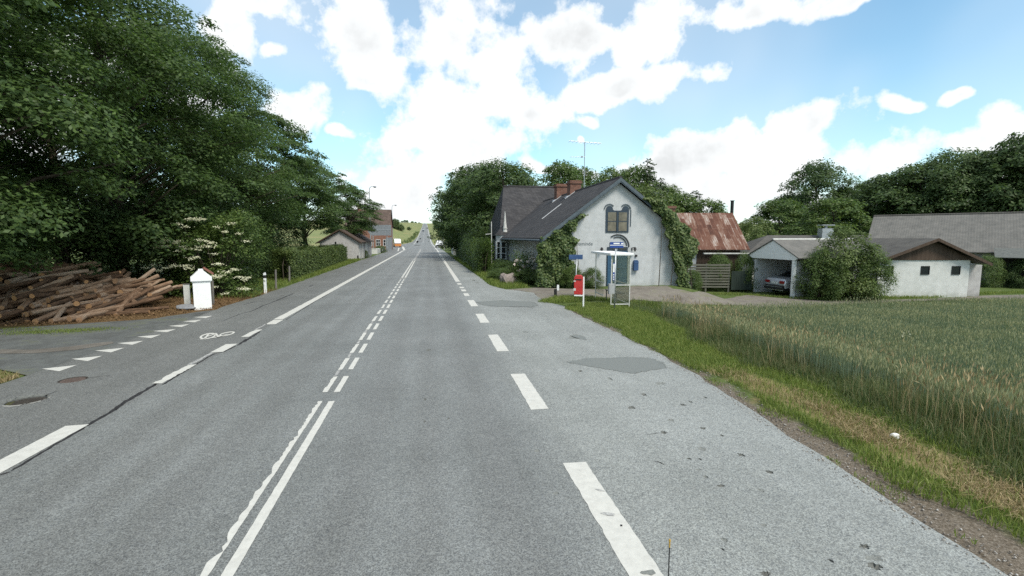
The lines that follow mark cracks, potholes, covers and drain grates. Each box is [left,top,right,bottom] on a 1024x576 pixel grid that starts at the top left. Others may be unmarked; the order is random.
manhole cover [0,394,52,407]
